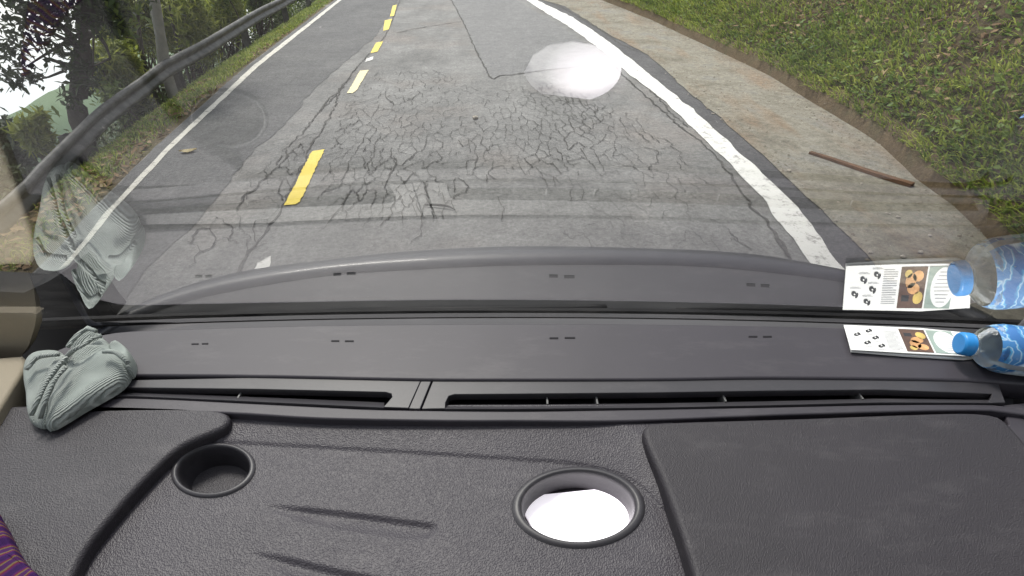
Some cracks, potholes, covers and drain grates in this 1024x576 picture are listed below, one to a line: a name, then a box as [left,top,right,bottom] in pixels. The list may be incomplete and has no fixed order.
crack [546,1,762,216]
crack [318,71,720,227]
